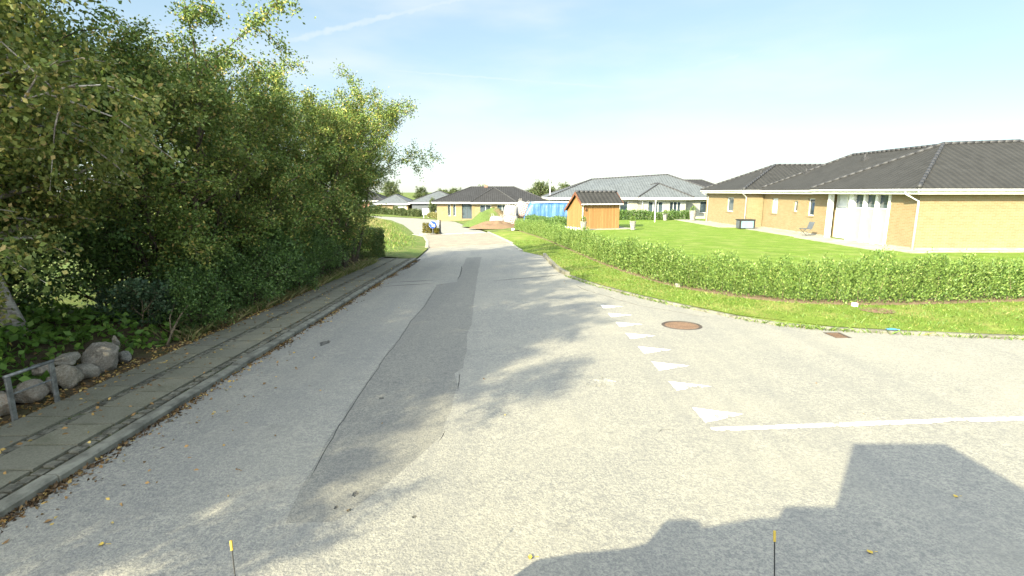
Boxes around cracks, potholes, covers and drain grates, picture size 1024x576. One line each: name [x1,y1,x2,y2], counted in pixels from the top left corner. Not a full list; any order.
manhole cover [661,321,703,330]
